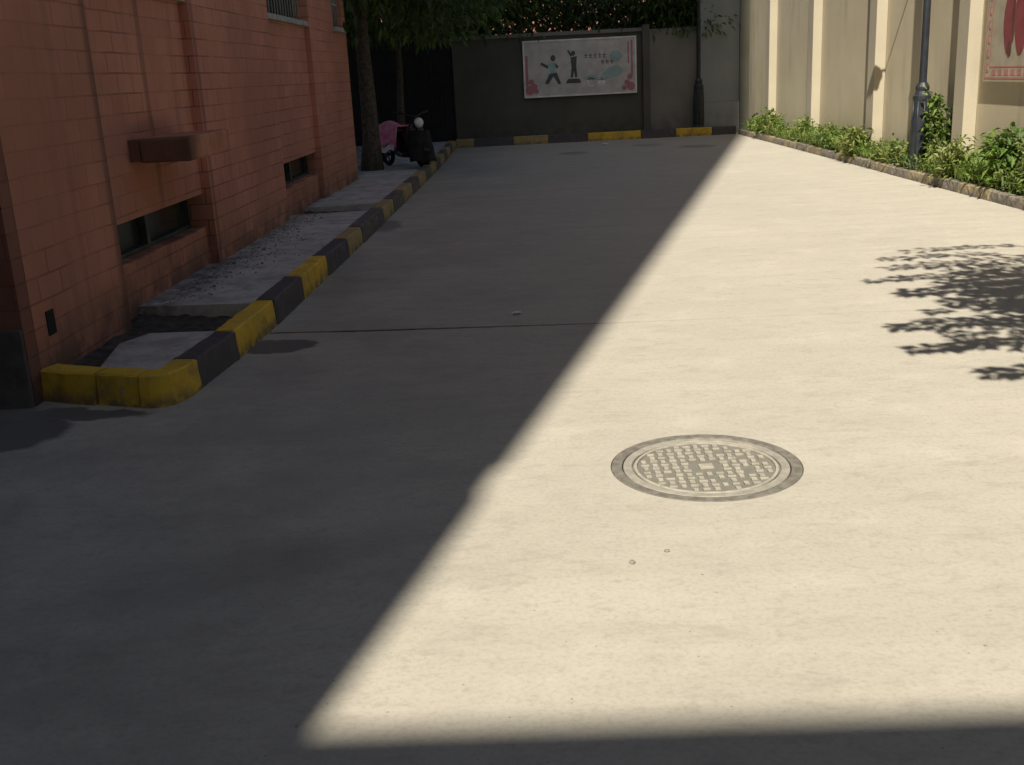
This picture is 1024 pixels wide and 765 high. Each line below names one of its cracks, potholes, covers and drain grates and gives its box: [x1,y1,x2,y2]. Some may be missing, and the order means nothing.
manhole cover [611,434,803,502]
